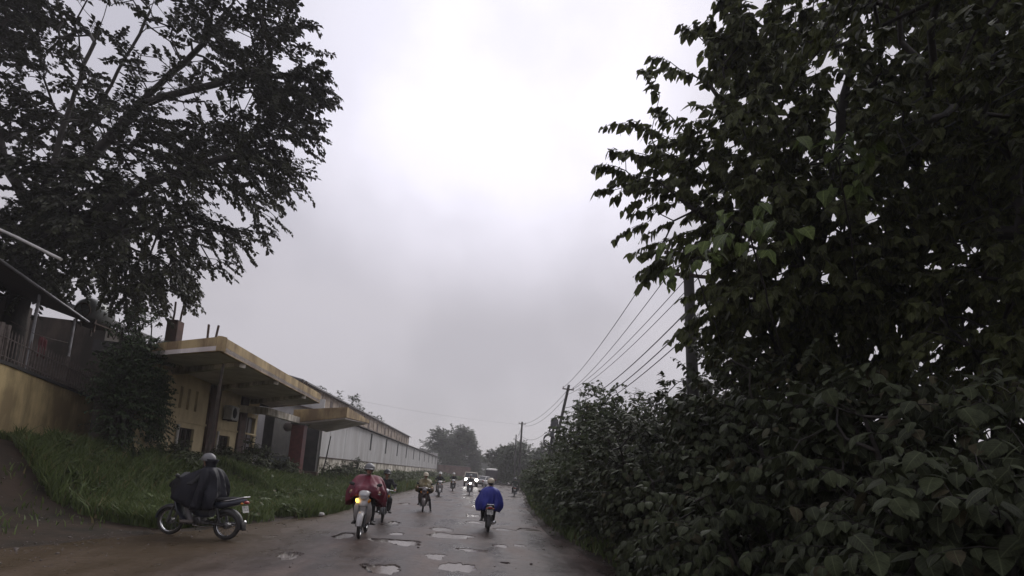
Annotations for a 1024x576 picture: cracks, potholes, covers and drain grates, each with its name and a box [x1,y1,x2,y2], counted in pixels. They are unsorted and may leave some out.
pothole [438,562,477,573]
pothole [275,552,304,560]
pothole [369,538,422,546]
pothole [359,564,401,575]
